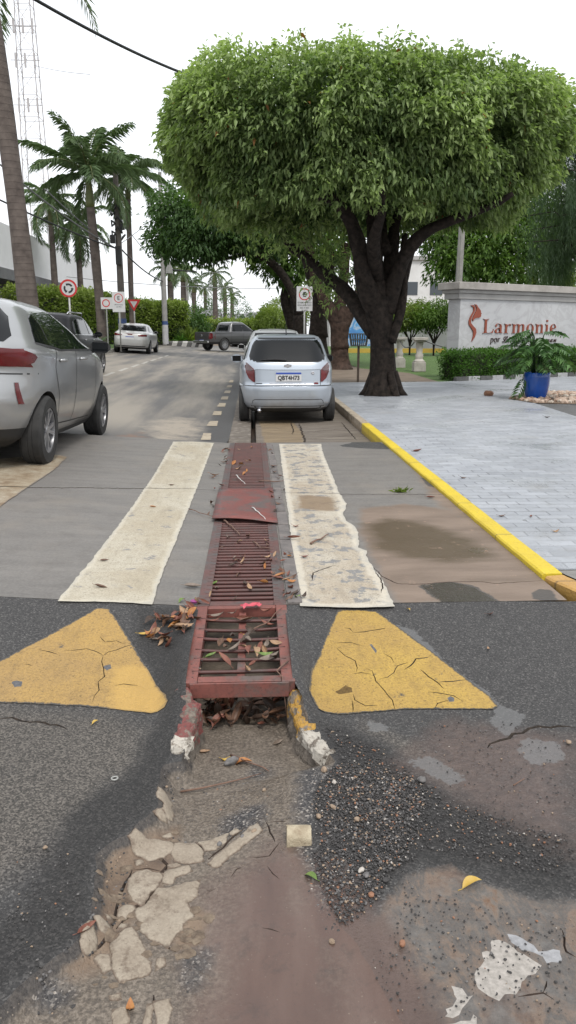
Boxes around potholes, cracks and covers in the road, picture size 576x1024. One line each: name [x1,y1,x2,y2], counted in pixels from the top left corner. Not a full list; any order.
drain grate [186,605,295,698]
crack [343,654,455,710]
drain grate [221,443,271,488]
crack [487,725,576,748]
pothole [0,698,402,1024]
drain grate [197,519,286,607]
crack [0,717,67,729]
